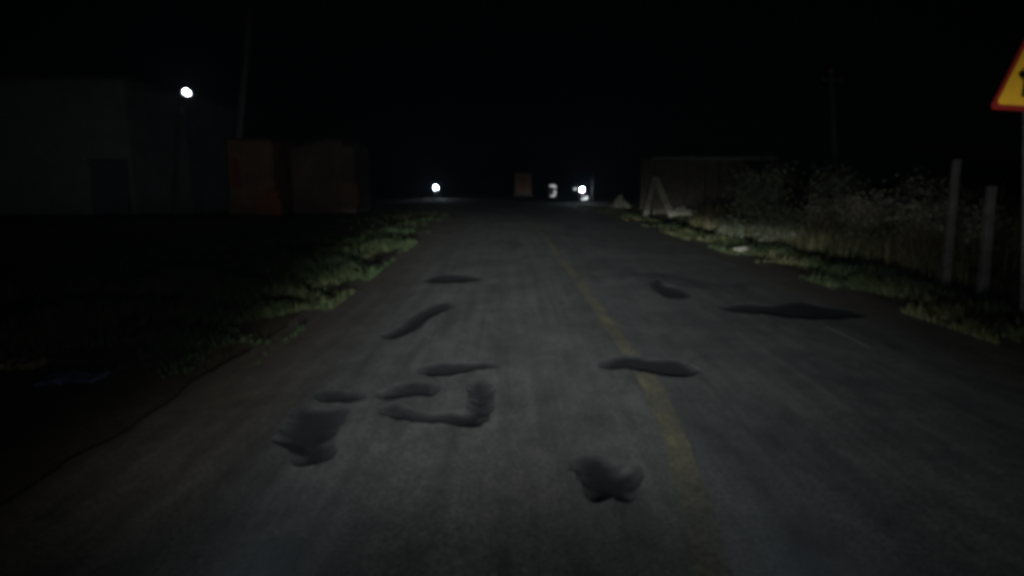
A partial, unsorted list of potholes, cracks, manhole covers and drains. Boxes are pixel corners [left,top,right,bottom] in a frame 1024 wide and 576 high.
pothole [597,355,705,378]
pothole [423,274,482,283]
pothole [313,389,368,403]
pothole [271,406,351,467]
pothole [568,453,645,503]
pothole [646,279,692,299]
pothole [718,301,871,320]
pothole [379,302,456,340]
pothole [377,379,496,428]
pothole [416,361,502,377]
